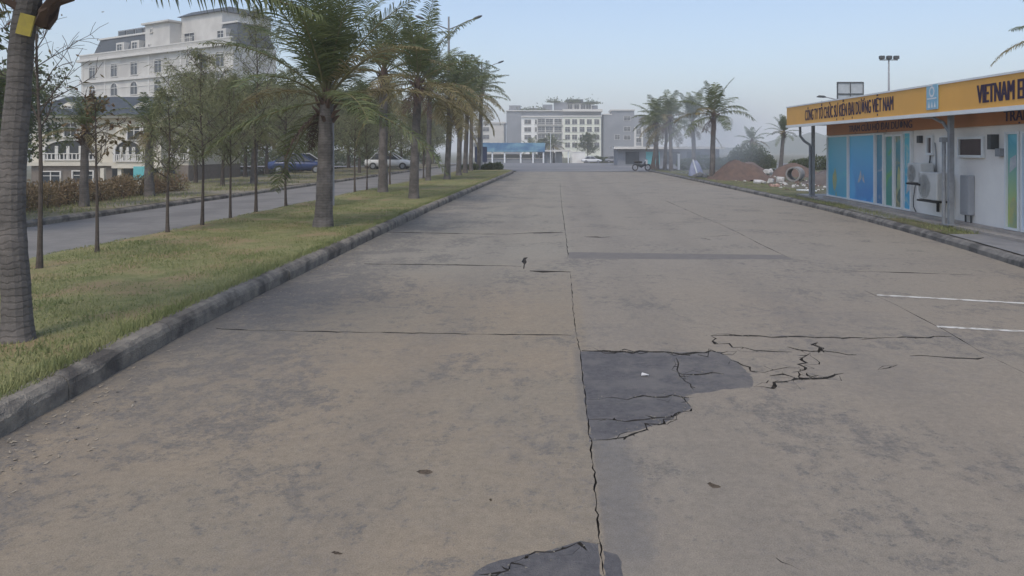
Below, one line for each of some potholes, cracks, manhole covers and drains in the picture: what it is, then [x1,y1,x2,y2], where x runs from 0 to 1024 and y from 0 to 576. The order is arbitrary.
crack [479,190,984,576]
